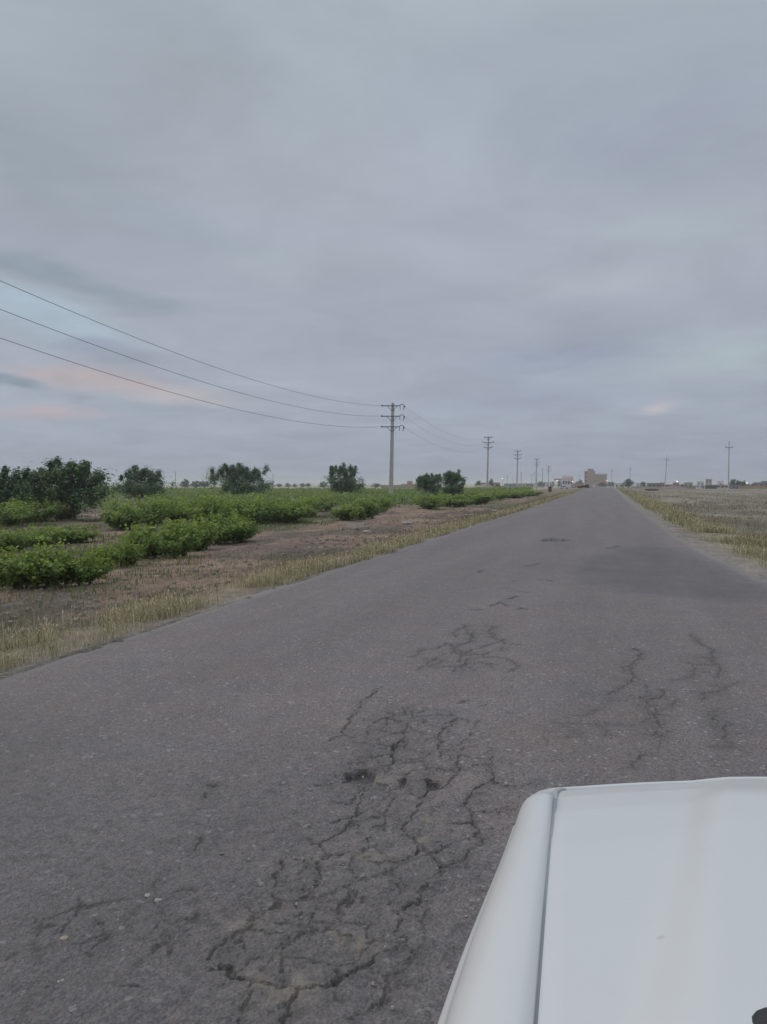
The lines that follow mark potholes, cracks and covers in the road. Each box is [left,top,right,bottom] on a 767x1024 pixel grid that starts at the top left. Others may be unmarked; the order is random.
crack [410,563,552,673]
crack [568,634,741,768]
pothole [344,769,375,785]
crack [6,686,529,1024]
